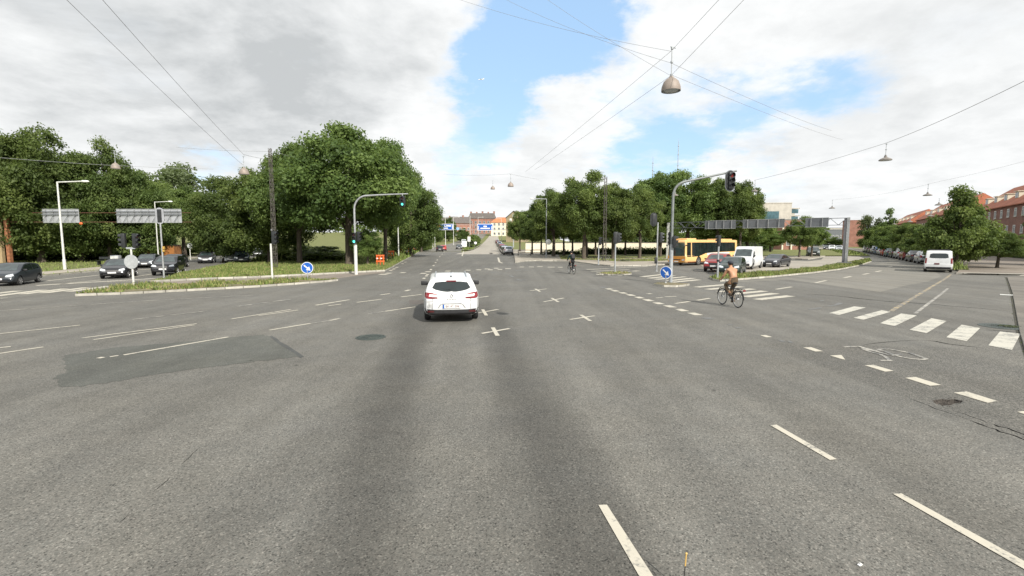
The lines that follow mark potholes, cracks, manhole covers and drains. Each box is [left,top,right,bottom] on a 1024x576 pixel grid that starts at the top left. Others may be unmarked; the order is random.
pothole [929,397,967,407]
